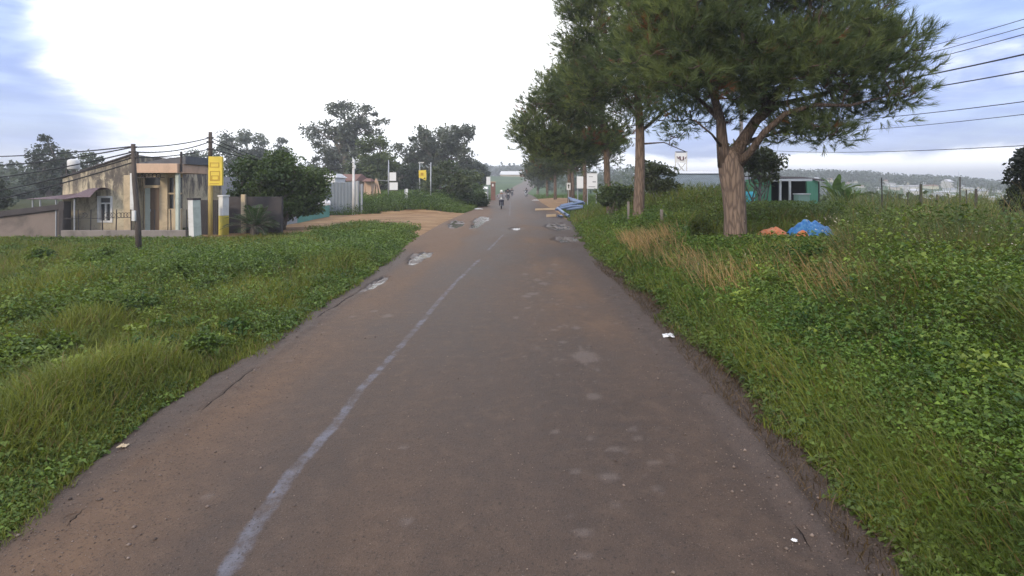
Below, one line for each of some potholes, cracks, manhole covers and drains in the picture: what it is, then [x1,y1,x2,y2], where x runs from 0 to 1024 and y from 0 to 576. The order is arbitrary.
pothole [353,275,393,296]
pothole [540,223,572,232]
pothole [464,216,493,231]
pothole [446,220,474,230]
crack [199,367,257,411]
crack [792,523,817,552]
pothole [404,251,436,267]
pothole [549,236,581,244]
crack [64,508,87,526]
